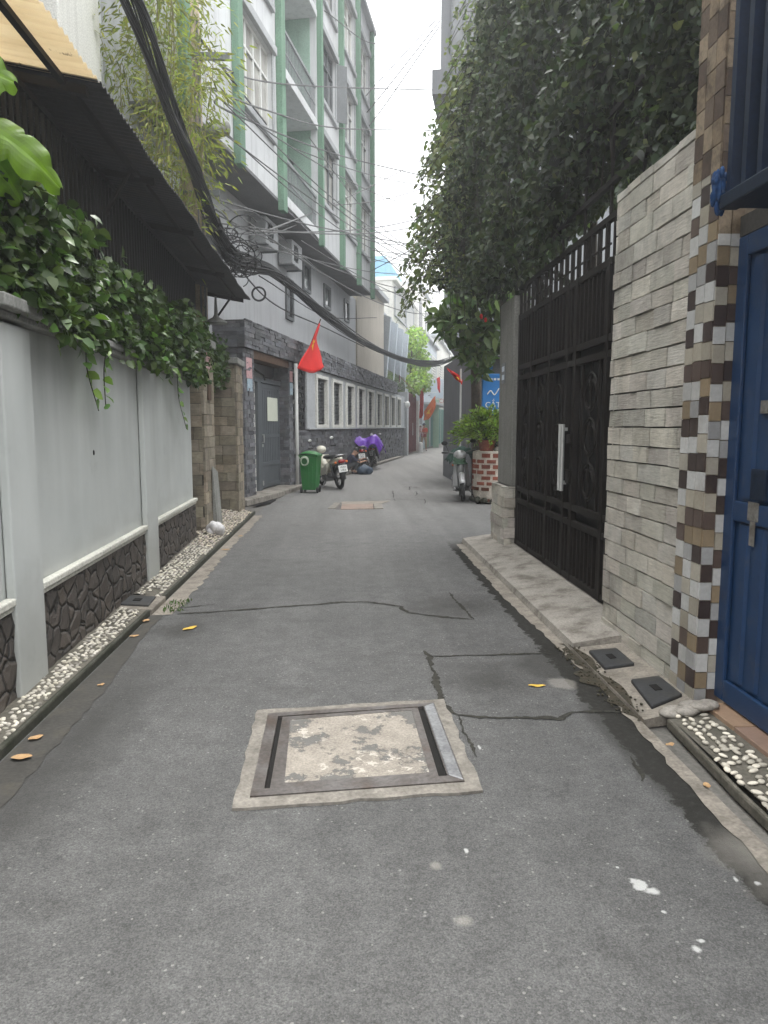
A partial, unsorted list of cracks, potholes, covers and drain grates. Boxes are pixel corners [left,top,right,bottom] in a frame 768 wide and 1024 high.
manhole cover [232,699,483,811]
crack [180,593,474,619]
crack [423,650,645,781]
manhole cover [328,501,389,510]
